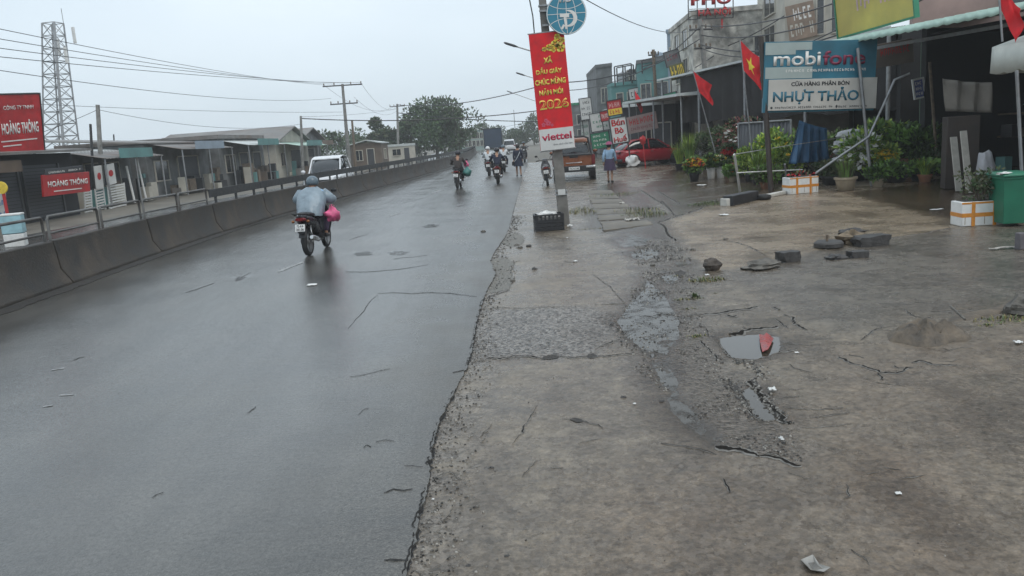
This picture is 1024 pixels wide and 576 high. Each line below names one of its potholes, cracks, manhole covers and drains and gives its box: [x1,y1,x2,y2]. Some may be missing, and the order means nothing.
crack [512,408,536,444]
crack [390,290,558,373]
crack [661,443,807,479]
crack [836,272,980,386]
